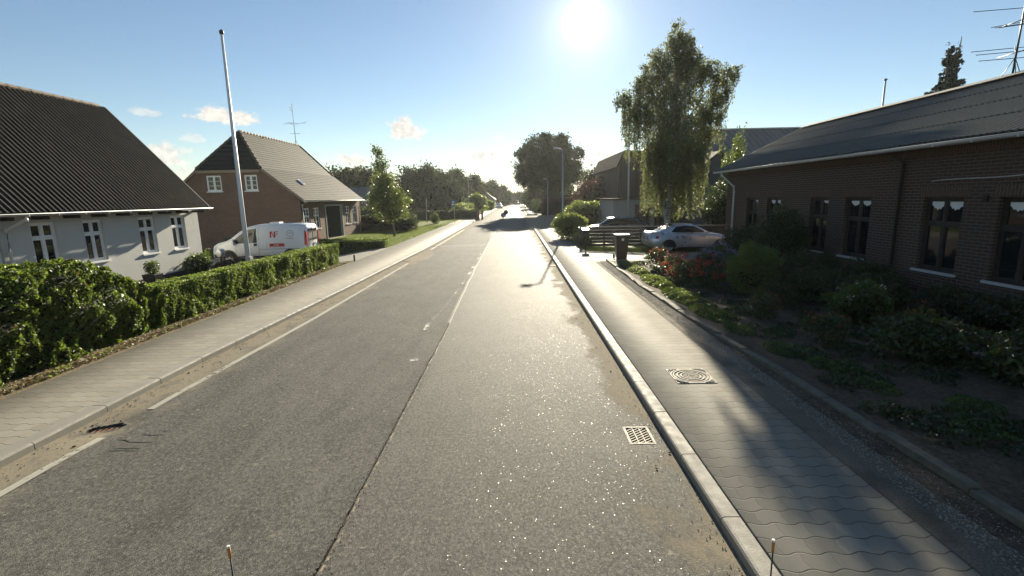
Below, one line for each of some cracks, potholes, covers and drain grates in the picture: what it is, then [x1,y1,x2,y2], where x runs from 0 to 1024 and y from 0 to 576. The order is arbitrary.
pothole [80,422,131,434]
drain grate [622,426,657,444]
manhole cover [665,368,718,384]
